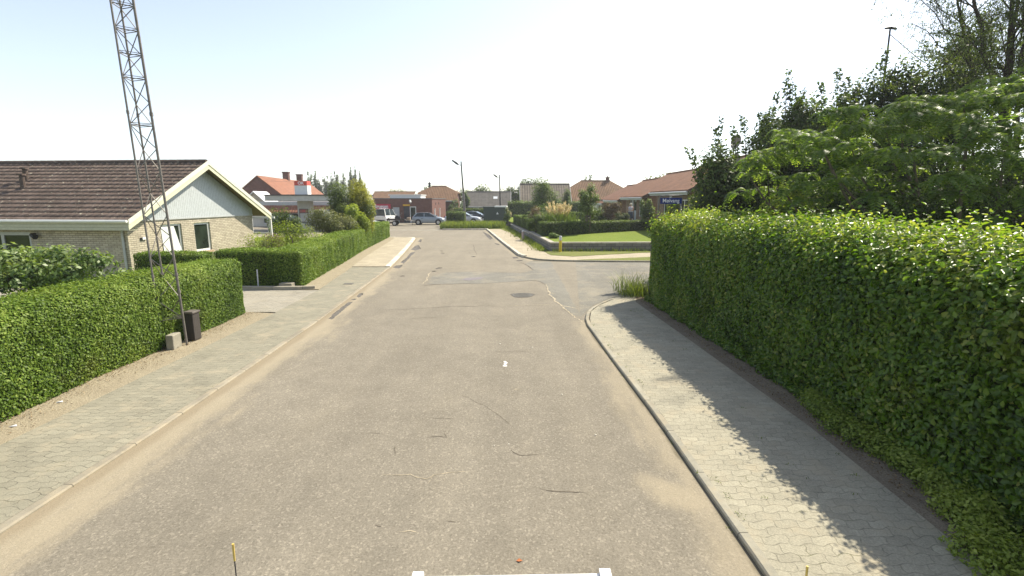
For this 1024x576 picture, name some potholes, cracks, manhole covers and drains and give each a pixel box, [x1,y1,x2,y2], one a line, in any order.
crack [424,263,583,323]
